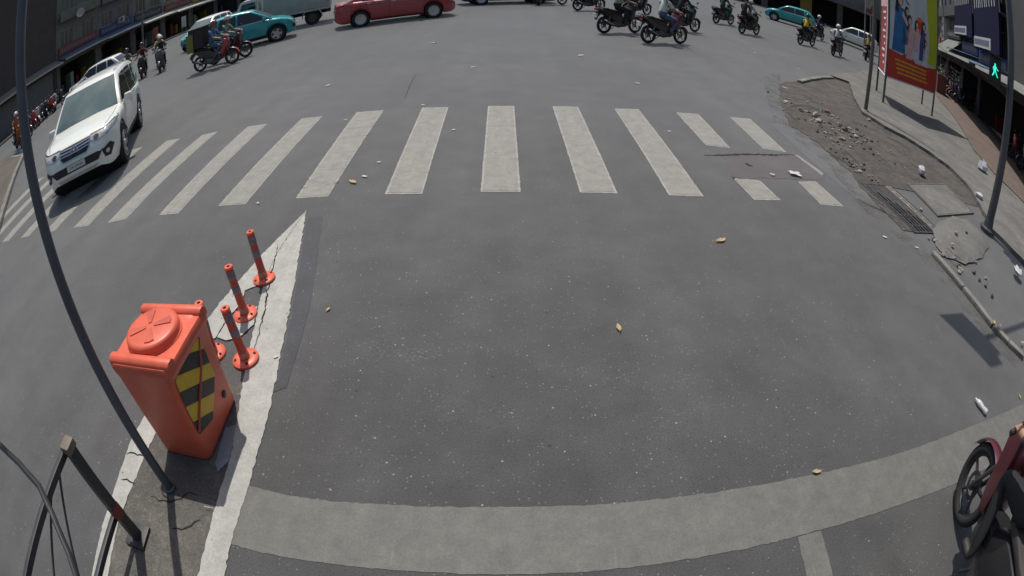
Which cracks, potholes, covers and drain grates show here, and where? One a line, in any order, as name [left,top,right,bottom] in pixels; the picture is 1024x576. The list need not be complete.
drain grate [860,182,935,234]
crack [121,479,199,503]
manhole cover [907,183,974,217]
